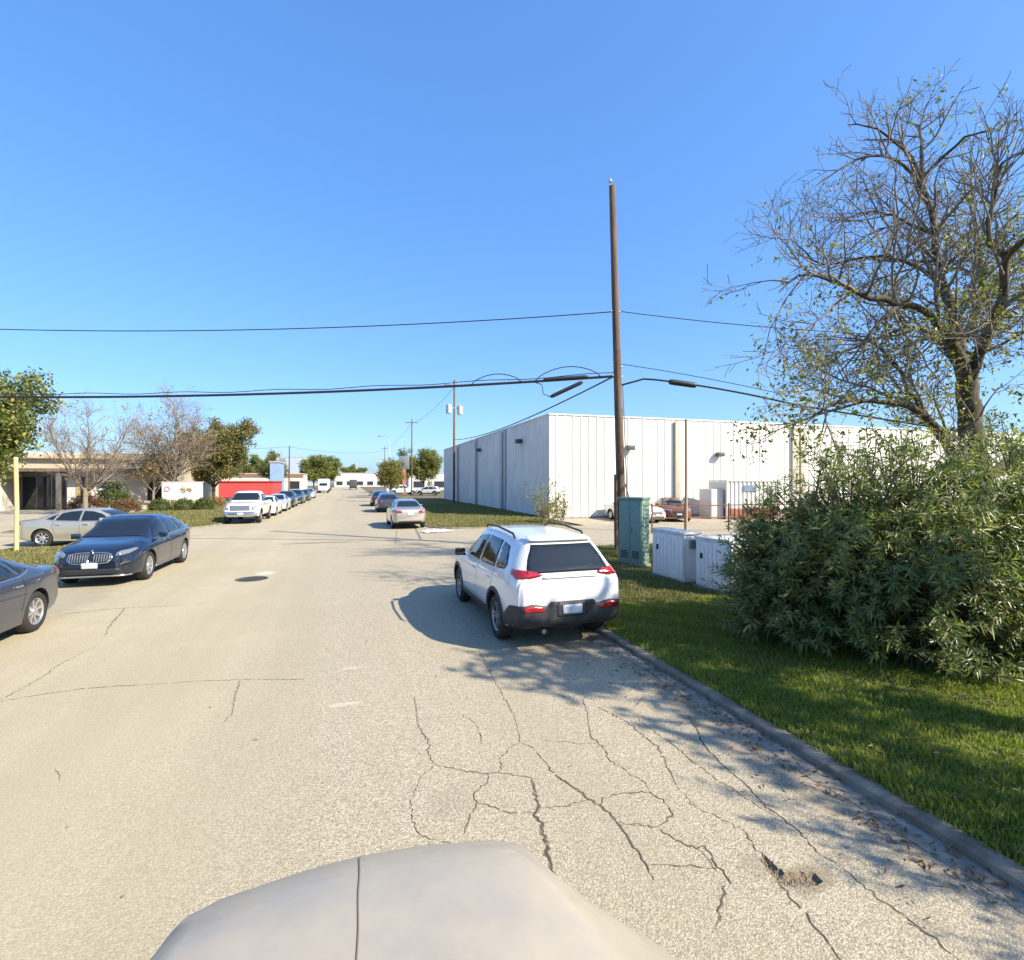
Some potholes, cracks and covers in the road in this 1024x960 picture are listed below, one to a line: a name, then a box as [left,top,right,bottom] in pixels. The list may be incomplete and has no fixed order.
crack [409,649,782,931]
crack [779,884,841,960]
crack [0,650,297,720]
pothole [758,855,823,888]
